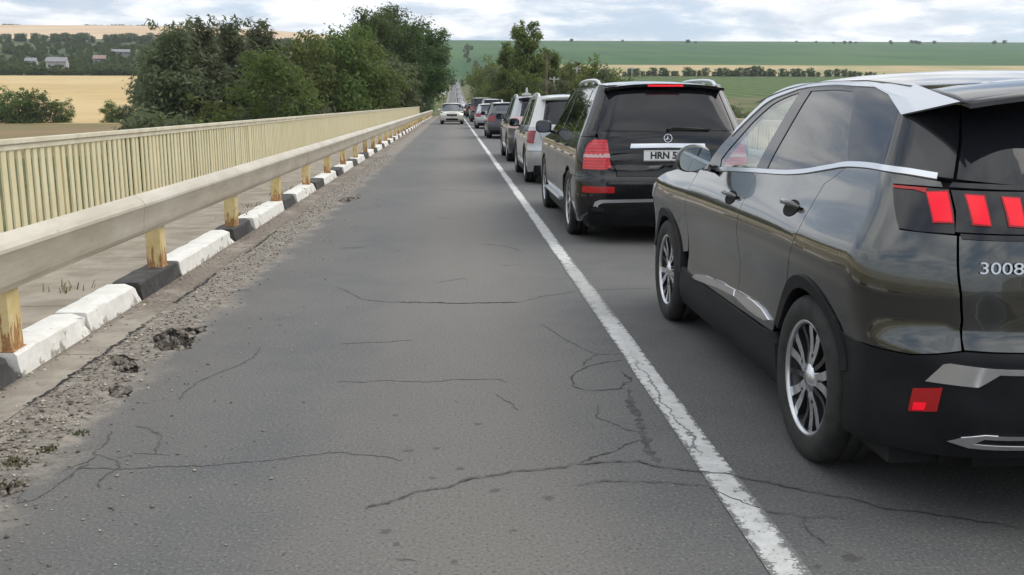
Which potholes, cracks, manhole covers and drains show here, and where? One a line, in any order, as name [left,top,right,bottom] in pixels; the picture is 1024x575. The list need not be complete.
crack [365,324,1020,546]
crack [337,287,647,304]
pothole [106,385,133,398]
crack [178,348,260,399]
pothole [110,354,145,373]
crack [17,426,402,503]
pothole [152,326,207,351]
